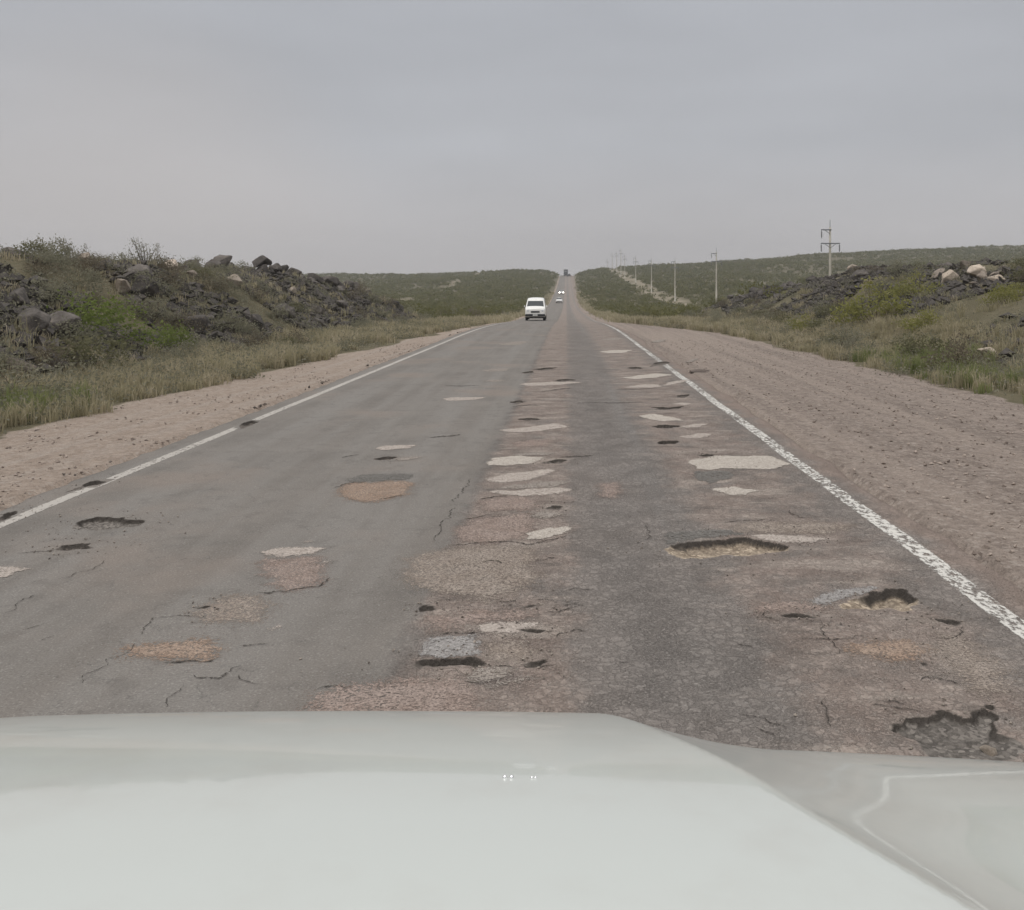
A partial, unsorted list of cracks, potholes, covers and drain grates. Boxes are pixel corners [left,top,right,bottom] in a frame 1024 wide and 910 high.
crack [165,660,258,706]
pothole [531,457,577,466]
